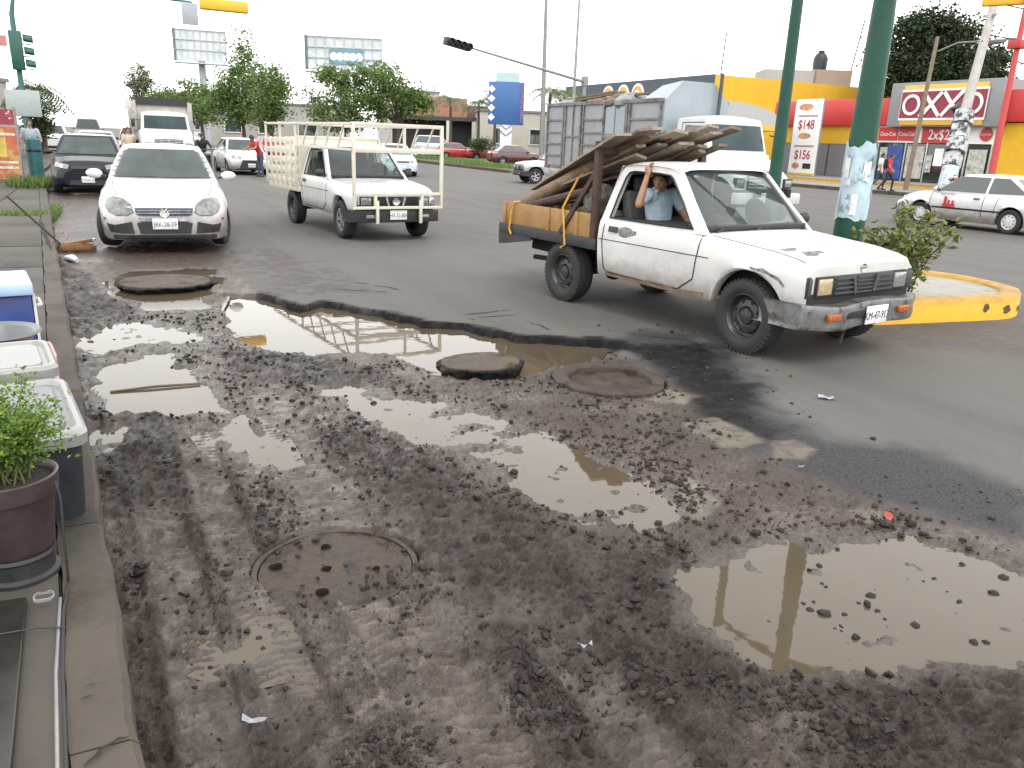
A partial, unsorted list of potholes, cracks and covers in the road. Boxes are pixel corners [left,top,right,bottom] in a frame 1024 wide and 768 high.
manhole cover [436,352,525,381]
manhole cover [251,529,418,612]
pothole [651,526,1024,695]
manhole cover [114,274,217,295]
manhole cover [552,363,665,398]
pothole [209,292,630,386]
pothole [78,346,236,418]
